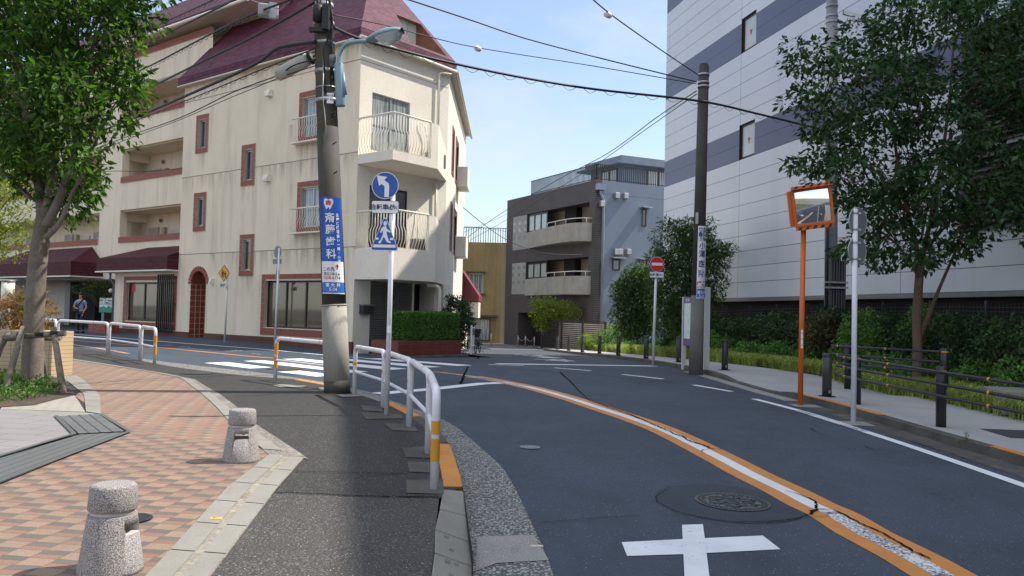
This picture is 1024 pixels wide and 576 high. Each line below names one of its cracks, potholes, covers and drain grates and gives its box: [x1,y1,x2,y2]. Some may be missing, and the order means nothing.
crack [655,486,931,559]
manhole cover [695,492,771,511]
